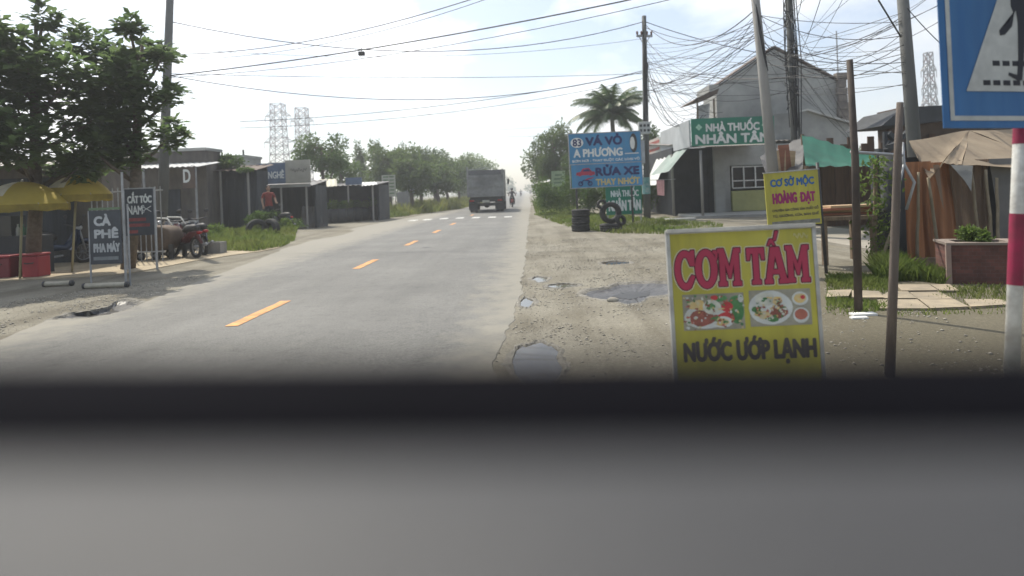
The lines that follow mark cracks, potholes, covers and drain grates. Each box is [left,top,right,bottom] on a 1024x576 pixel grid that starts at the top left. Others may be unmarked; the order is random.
pothole [43,298,146,322]
pothole [576,280,668,305]
pothole [506,339,565,355]
pothole [527,275,553,283]
pothole [516,296,539,309]
